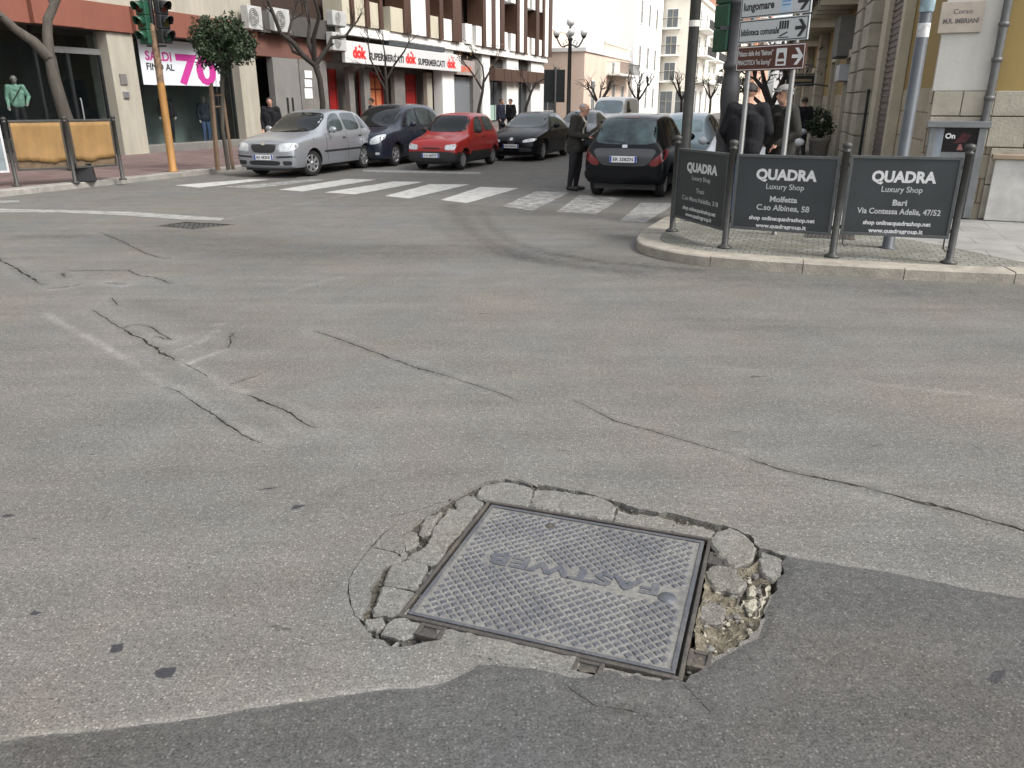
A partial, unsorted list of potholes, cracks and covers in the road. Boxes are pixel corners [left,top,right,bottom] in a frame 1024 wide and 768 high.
pothole [694,562,772,660]
crack [318,332,1024,714]
crack [0,233,316,444]
manhole cover [398,500,728,681]
